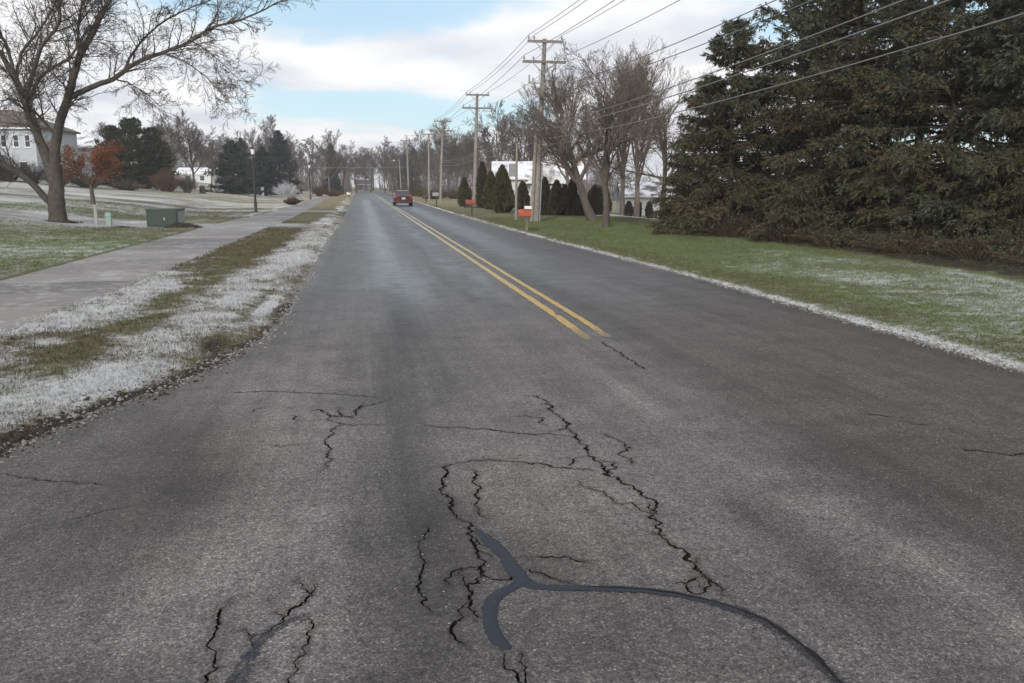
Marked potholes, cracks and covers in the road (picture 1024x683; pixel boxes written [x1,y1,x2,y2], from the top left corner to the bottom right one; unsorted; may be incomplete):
crack [233,391,381,469]
crack [415,395,844,683]
crack [204,579,316,683]
